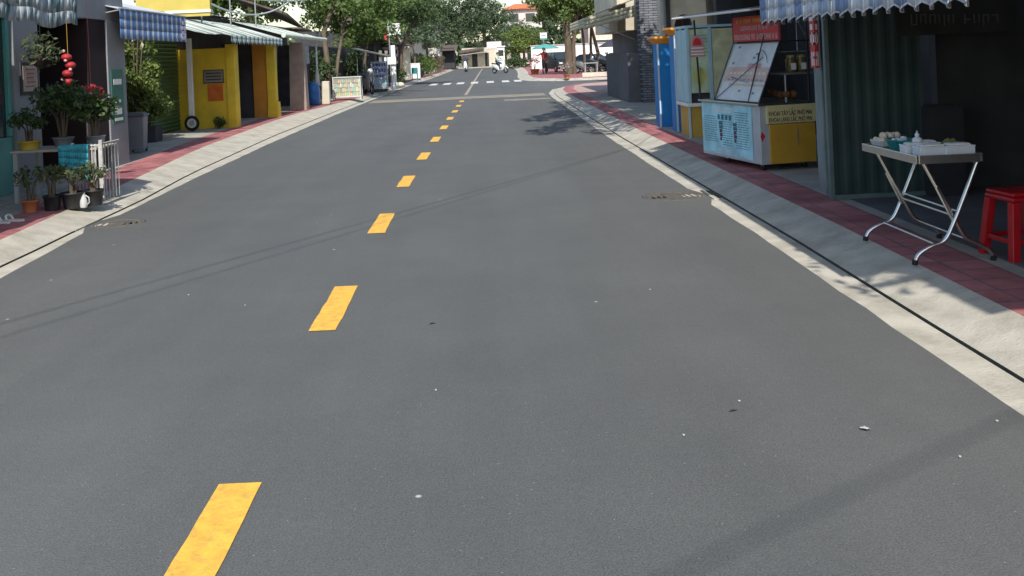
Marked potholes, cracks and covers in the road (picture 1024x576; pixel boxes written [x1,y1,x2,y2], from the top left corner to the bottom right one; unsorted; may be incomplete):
manhole cover [75,219,145,232]
manhole cover [643,190,723,201]
